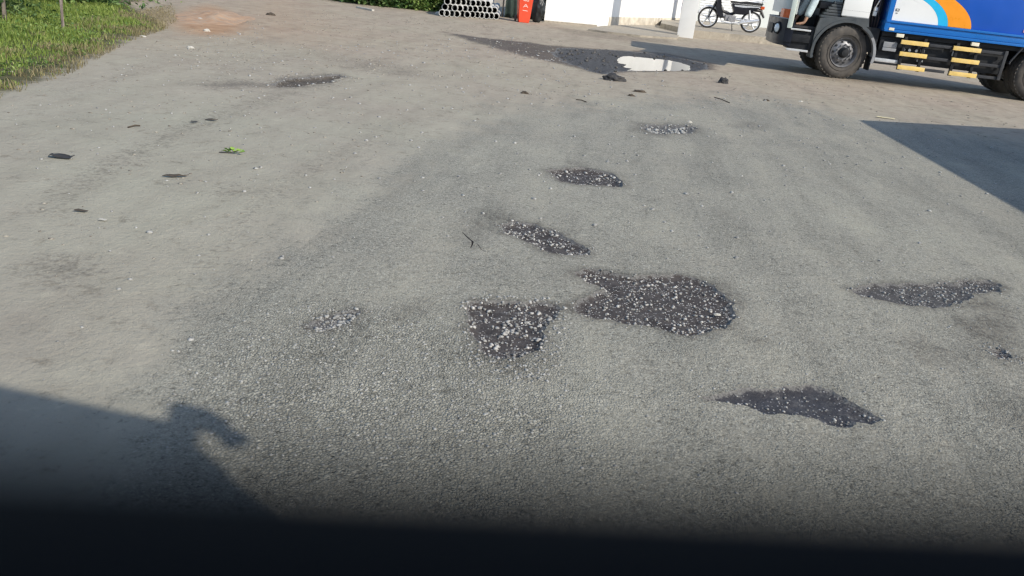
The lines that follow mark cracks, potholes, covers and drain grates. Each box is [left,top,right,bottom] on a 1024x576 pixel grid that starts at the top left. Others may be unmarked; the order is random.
pothole [269,74,346,87]
pothole [306,308,361,332]
pothole [850,279,1002,309]
pothole [500,220,591,255]
pothole [570,268,736,336]
pothole [701,385,881,428]
pothole [464,300,563,360]
pothole [987,346,1013,359]
pothole [640,124,699,134]
pothole [546,166,623,187]
